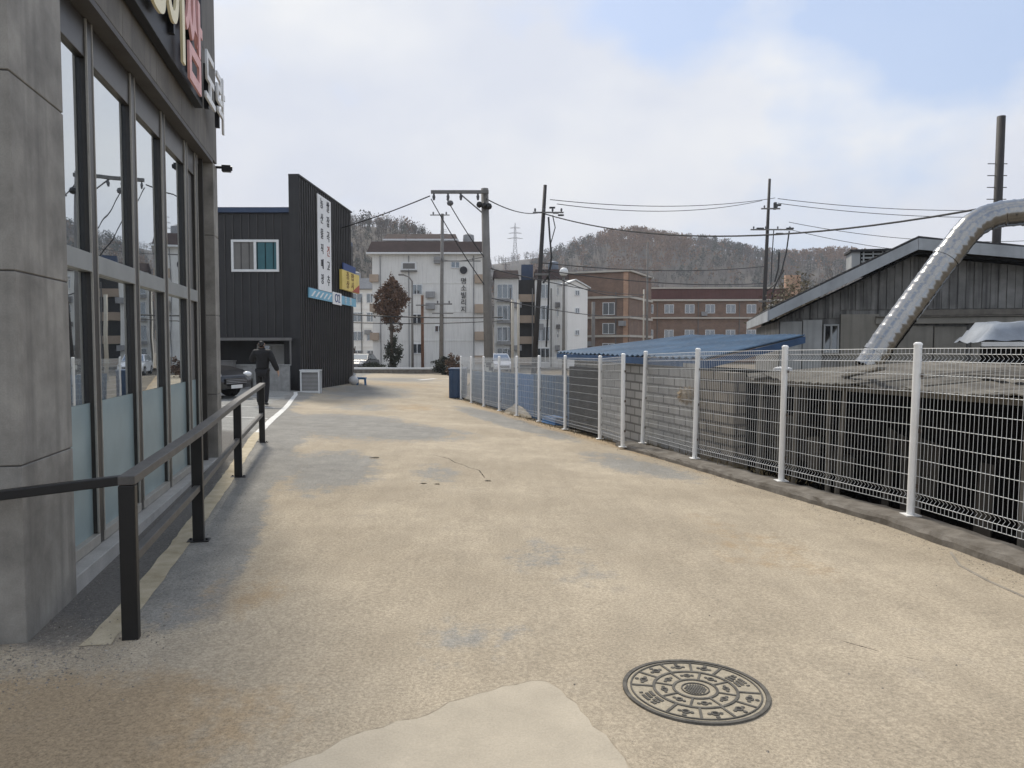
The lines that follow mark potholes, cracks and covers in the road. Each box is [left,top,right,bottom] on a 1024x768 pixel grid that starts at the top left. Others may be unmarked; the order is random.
manhole cover [623,659,771,726]
